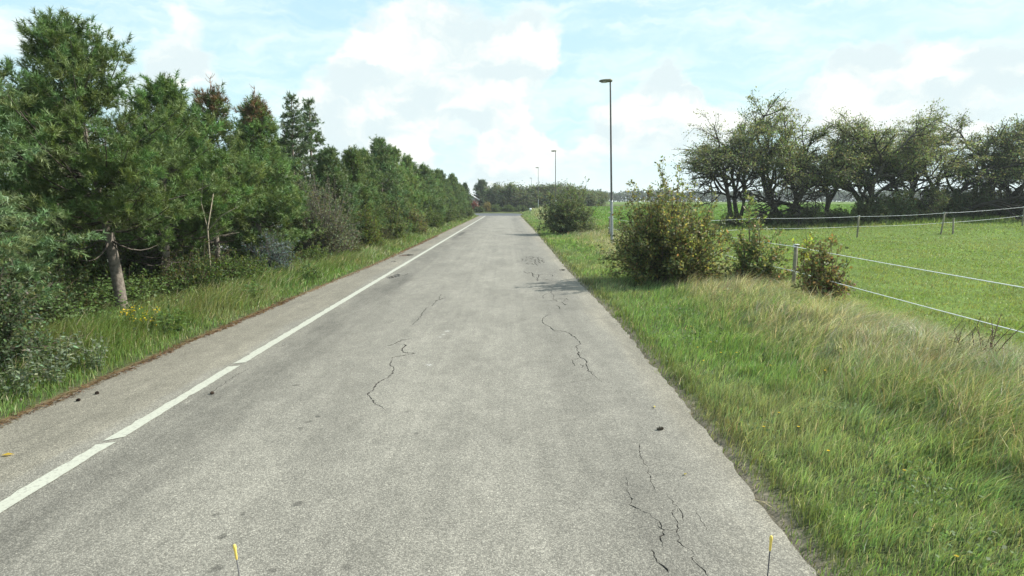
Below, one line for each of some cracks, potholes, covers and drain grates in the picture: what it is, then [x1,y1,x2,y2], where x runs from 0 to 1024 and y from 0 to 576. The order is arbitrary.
crack [367,294,446,410]
crack [624,444,707,575]
crack [525,257,601,382]
